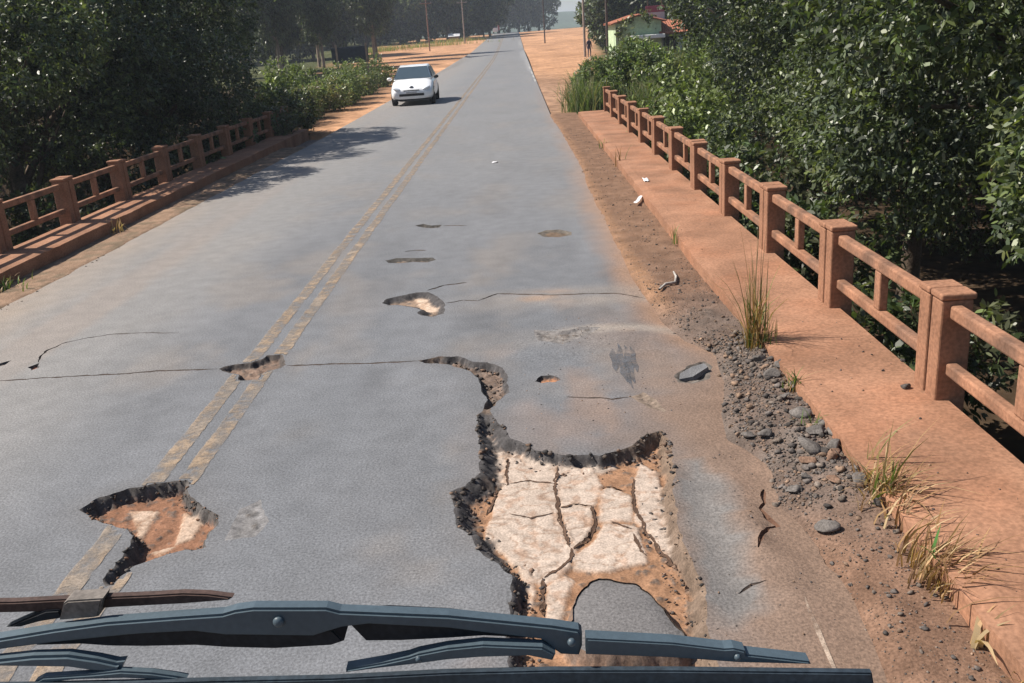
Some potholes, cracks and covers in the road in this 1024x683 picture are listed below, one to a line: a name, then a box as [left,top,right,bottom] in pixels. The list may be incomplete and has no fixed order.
crack [0,332,208,381]
pothole [80,480,219,587]
crack [429,282,642,303]
pothole [419,356,719,667]
pothole [383,292,445,317]
pothole [220,354,286,381]
pothole [538,229,572,237]
